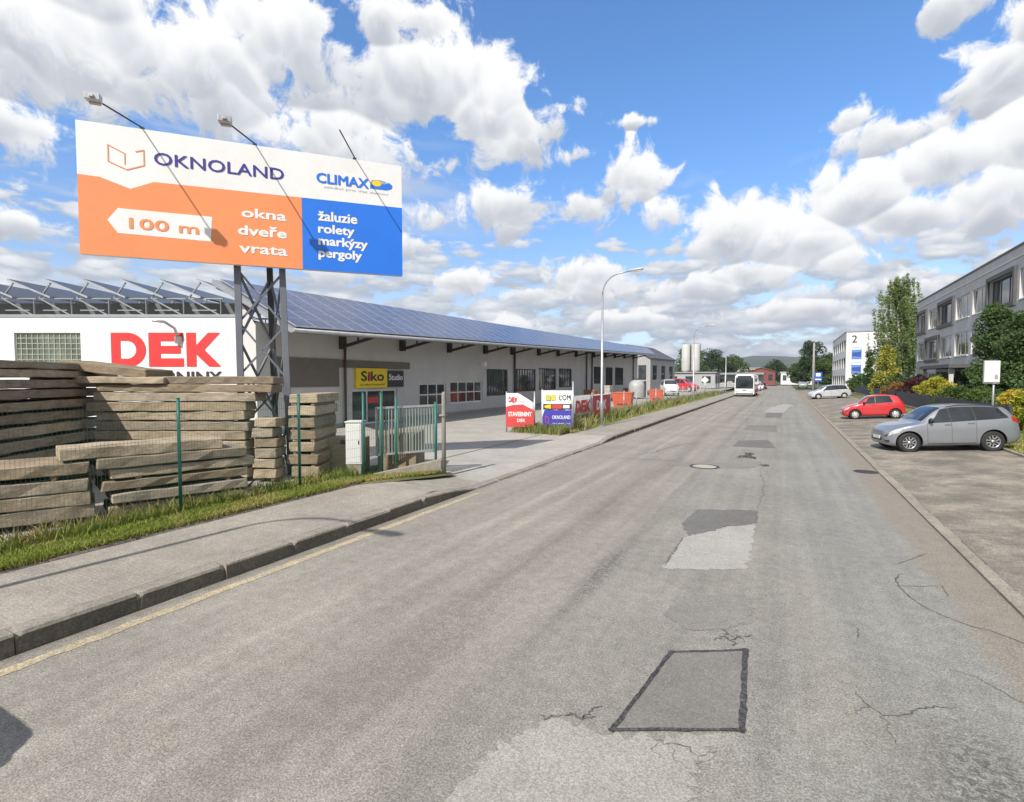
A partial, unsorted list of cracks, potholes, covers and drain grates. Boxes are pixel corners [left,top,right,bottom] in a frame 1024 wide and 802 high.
crack [714,630,750,646]
crack [894,553,1023,643]
crack [852,693,953,743]
crack [542,706,601,720]
crack [650,737,714,772]
